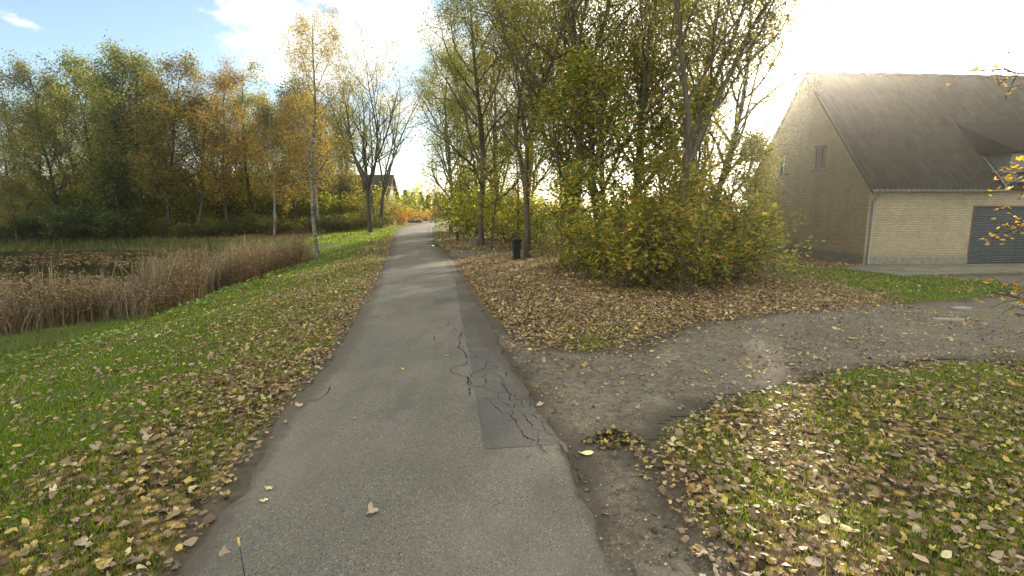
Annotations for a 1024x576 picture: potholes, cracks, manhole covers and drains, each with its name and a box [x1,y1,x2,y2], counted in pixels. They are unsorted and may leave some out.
crack [433,318,590,498]
